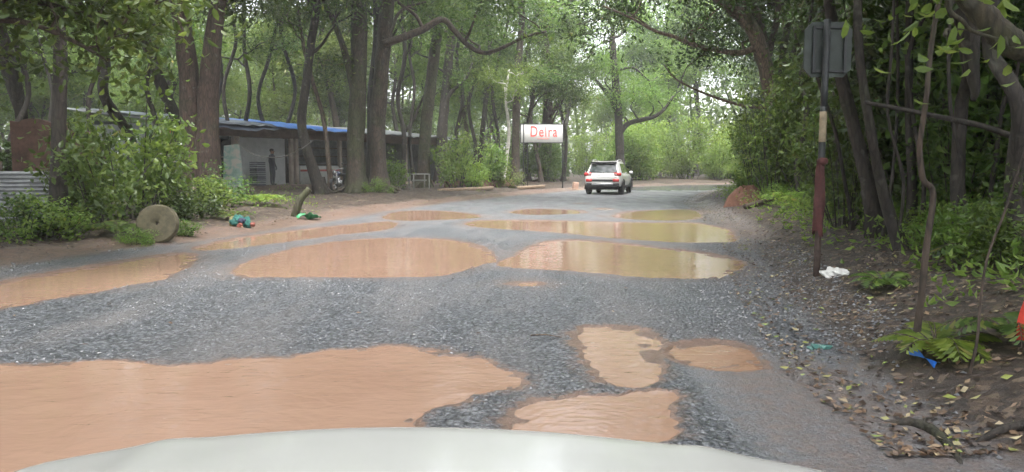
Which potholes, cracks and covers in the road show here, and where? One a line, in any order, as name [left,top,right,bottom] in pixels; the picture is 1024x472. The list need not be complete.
pothole [222,237,504,279]
pothole [490,238,756,280]
pothole [479,385,710,445]
pothole [607,209,709,221]
pothole [0,341,545,472]
pothole [550,320,689,390]
pothole [0,251,209,311]
pothole [662,334,783,376]
pothole [458,219,747,243]
pothole [182,221,403,252]
pothole [376,210,489,221]
